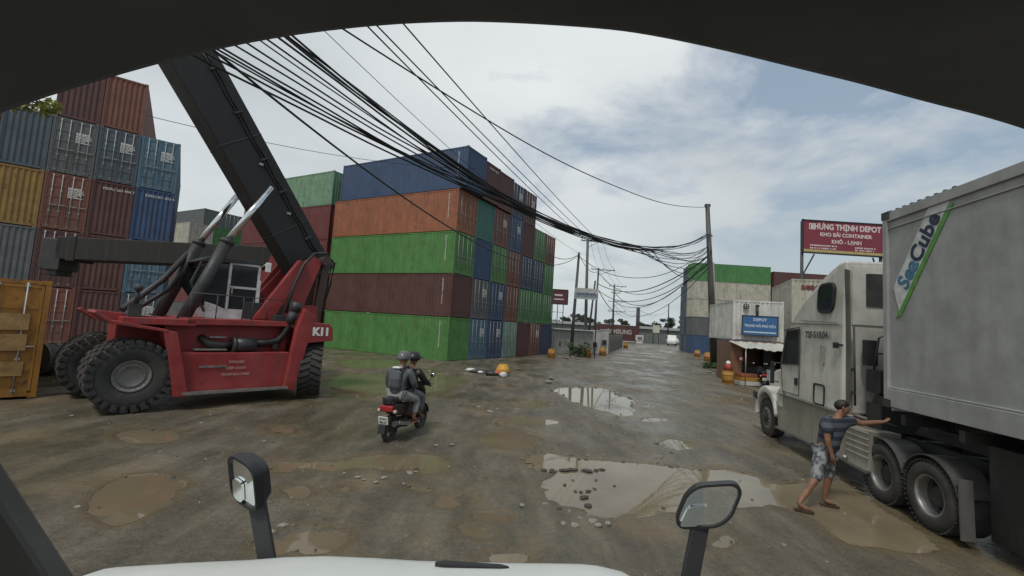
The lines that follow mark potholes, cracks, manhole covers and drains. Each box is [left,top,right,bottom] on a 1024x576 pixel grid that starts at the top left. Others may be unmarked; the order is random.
pothole [267,454,450,473]
pothole [653,438,696,450]
pothole [492,416,561,427]
pothole [249,525,350,555]
pothole [548,386,637,416]
pothole [435,493,478,509]
pothole [477,430,544,450]
pothole [518,451,947,553]
pothole [454,522,498,540]
pothole [113,429,188,444]
pothole [281,482,311,499]
pothole [469,511,511,521]
